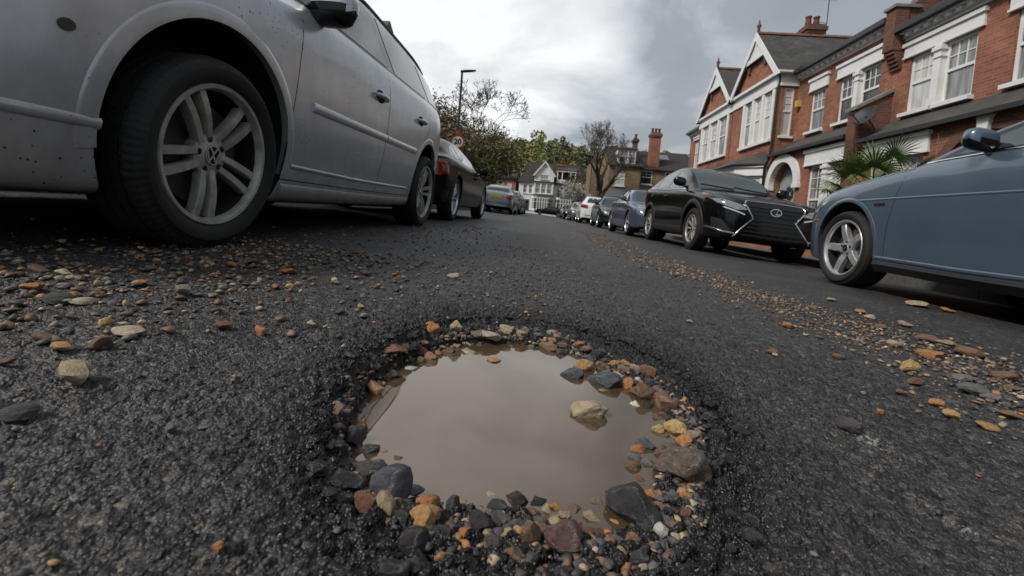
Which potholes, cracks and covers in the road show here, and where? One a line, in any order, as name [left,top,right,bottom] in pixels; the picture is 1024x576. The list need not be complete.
pothole [313,317,744,576]
